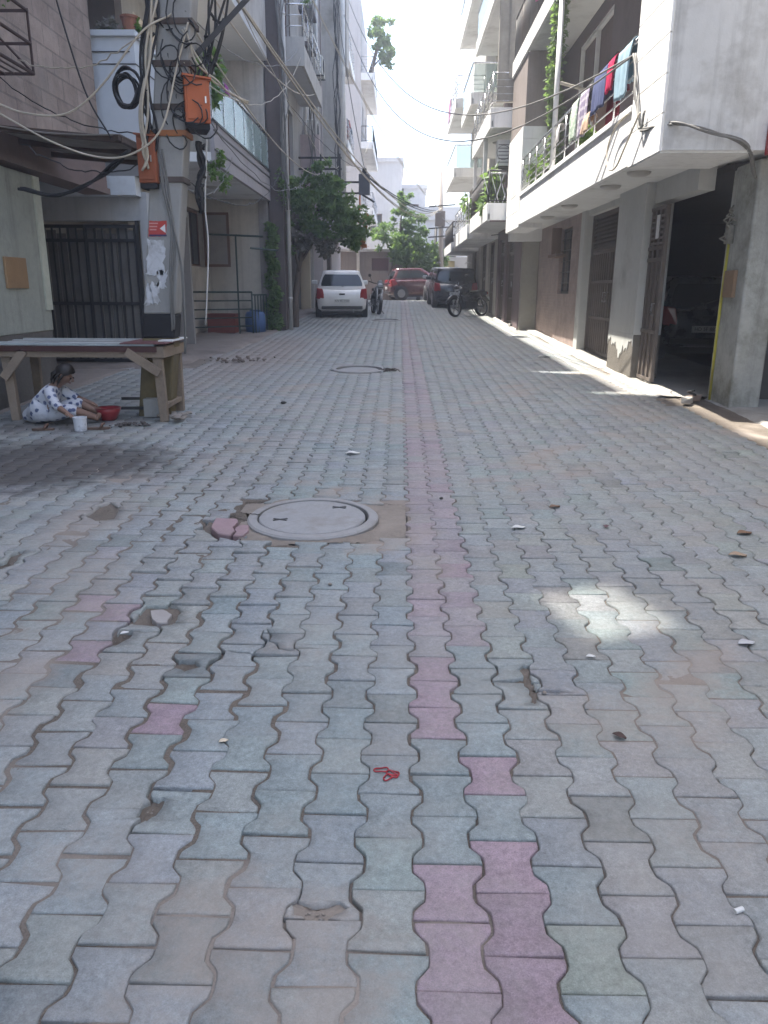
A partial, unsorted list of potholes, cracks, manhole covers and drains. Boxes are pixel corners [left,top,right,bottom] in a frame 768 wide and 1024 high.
pothole [88,504,119,521]
manhole cover [332,365,385,374]
pothole [112,634,132,646]
pothole [139,801,165,823]
pothole [128,607,181,631]
pothole [0,553,23,569]
manhole cover [239,498,406,546]
